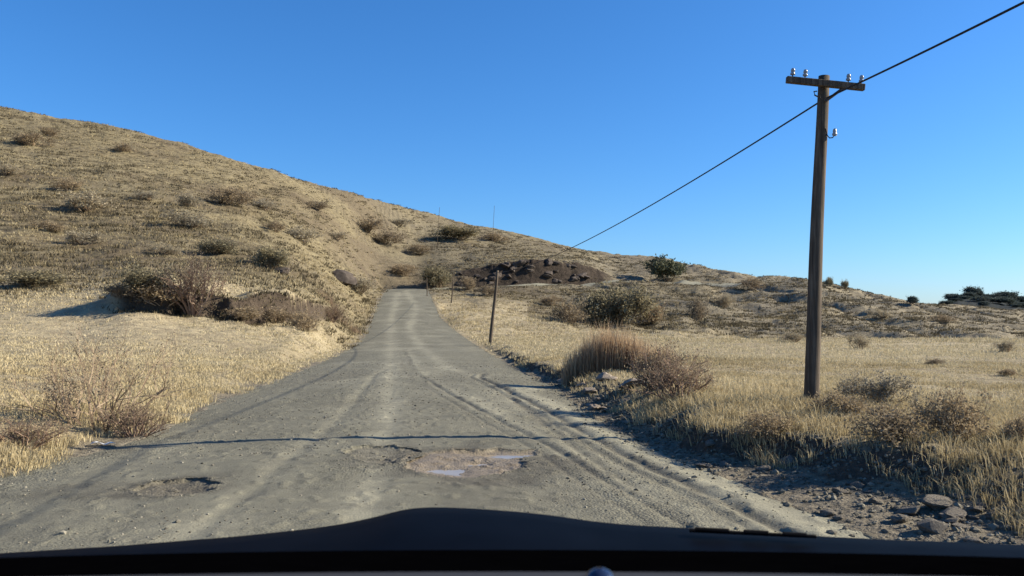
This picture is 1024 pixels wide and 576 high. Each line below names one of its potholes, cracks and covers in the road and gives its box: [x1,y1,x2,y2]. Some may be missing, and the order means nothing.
pothole [123,476,229,499]
pothole [394,447,543,479]
pothole [337,444,427,465]
